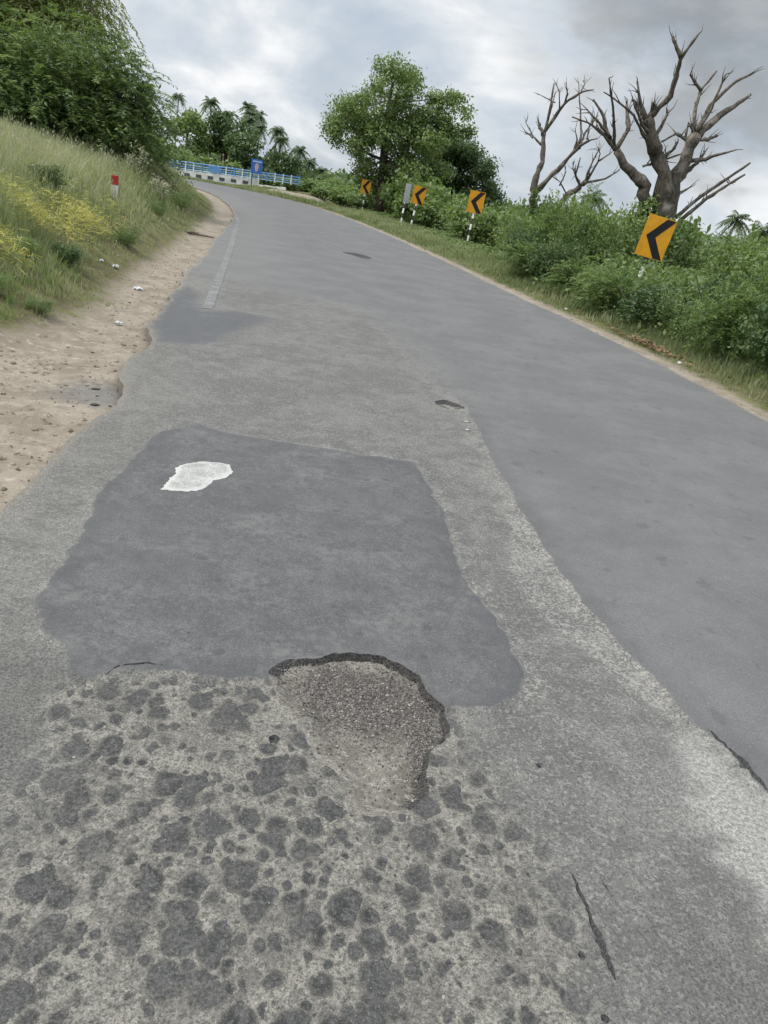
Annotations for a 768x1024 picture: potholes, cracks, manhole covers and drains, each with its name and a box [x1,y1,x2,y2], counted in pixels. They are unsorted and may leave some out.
pothole [435,400,464,410]
crack [107,662,174,675]
crack [571,872,616,980]
crack [706,729,768,791]
